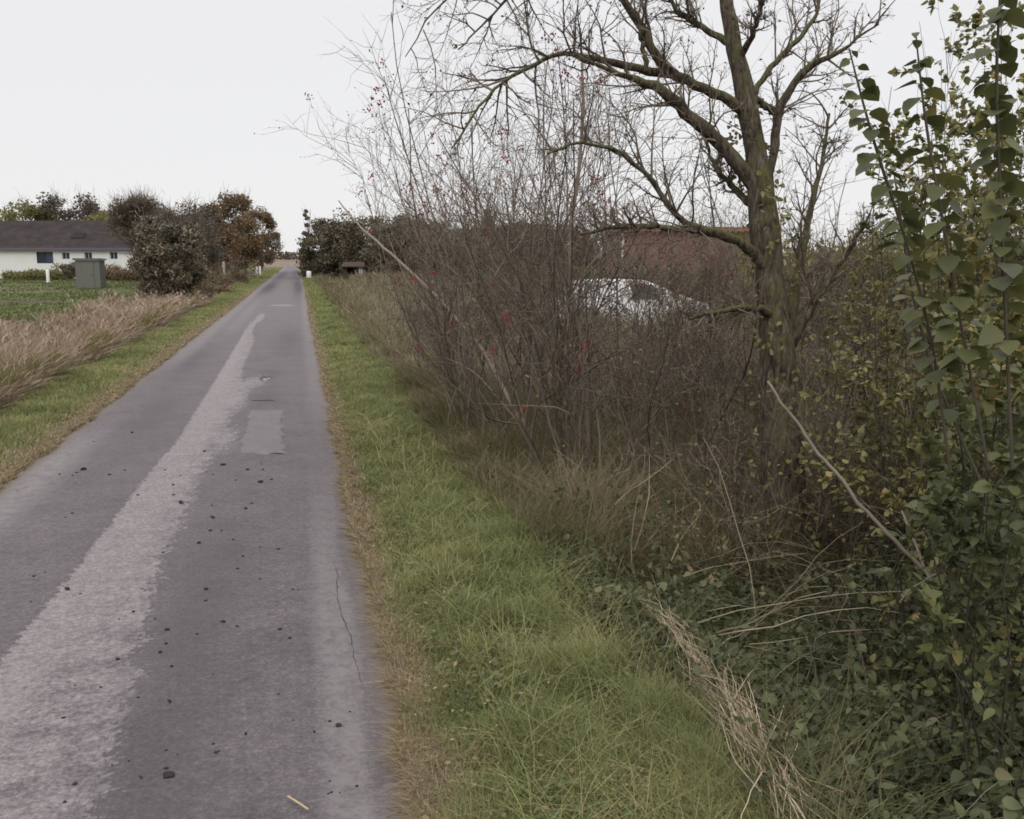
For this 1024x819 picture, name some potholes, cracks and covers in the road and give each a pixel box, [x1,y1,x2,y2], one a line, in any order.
crack [335,567,361,681]
